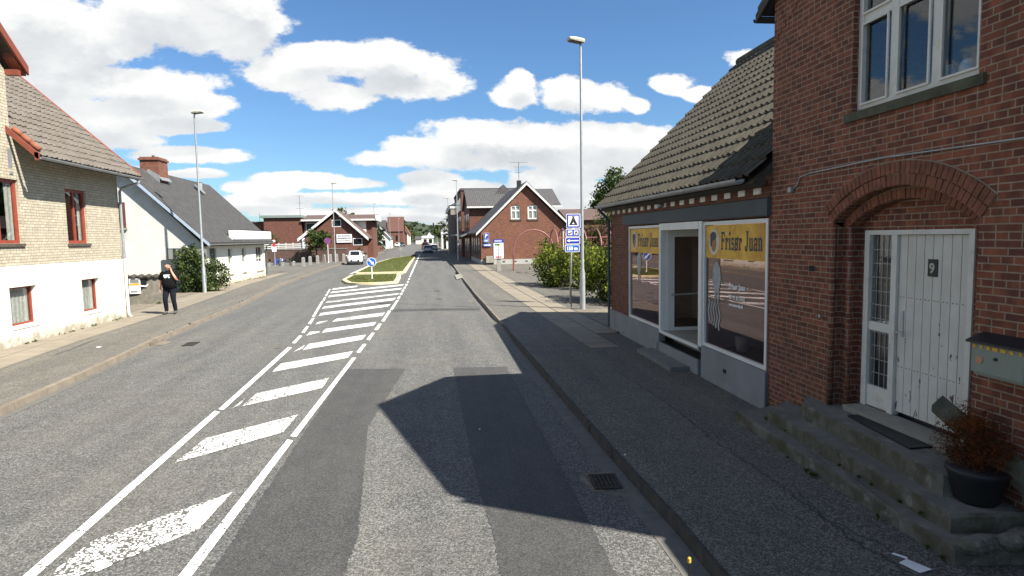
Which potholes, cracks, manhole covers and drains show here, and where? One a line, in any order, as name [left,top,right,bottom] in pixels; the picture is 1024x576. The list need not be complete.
drain grate [588,473,623,490]
